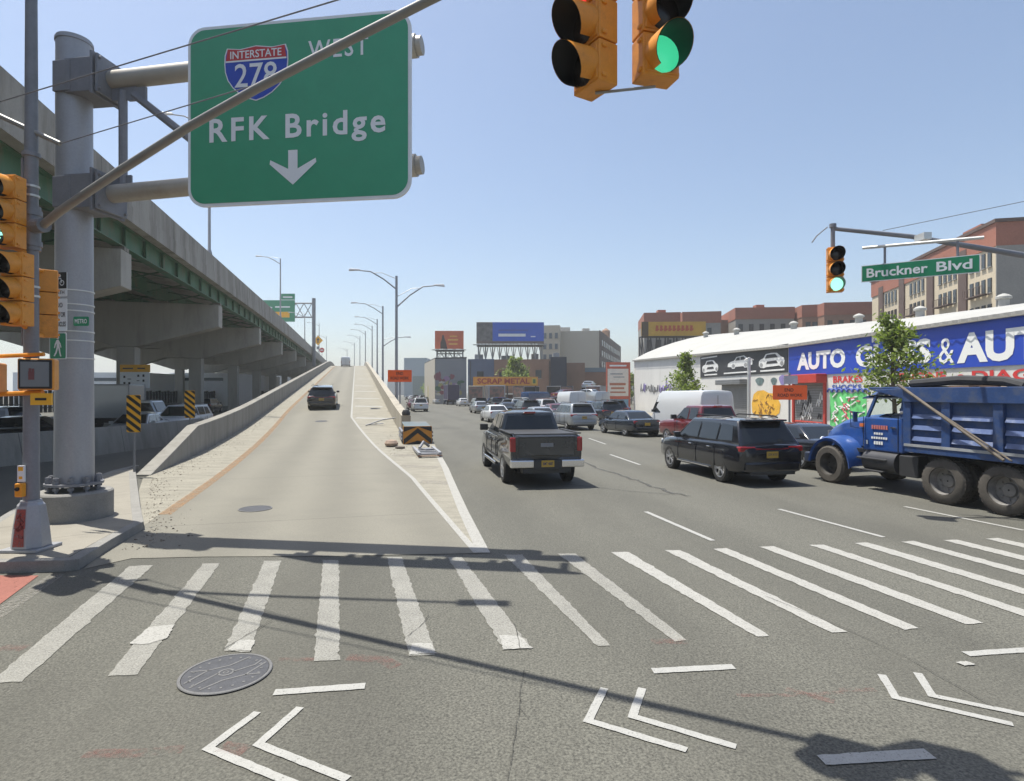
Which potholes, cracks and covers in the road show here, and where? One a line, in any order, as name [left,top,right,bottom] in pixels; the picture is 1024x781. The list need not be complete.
manhole cover [176,653,273,695]
crack [507,671,529,781]
